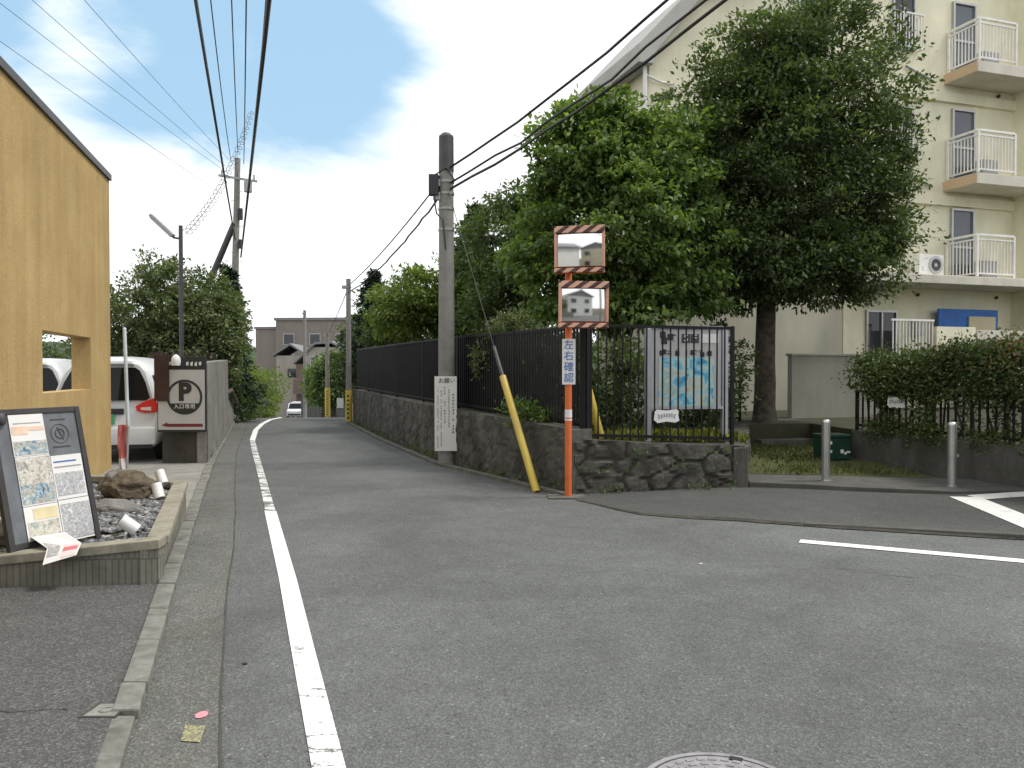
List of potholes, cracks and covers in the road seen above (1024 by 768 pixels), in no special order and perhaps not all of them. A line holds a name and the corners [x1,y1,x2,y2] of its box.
manhole cover [647,752,776,768]
utility cover [78,703,121,718]
